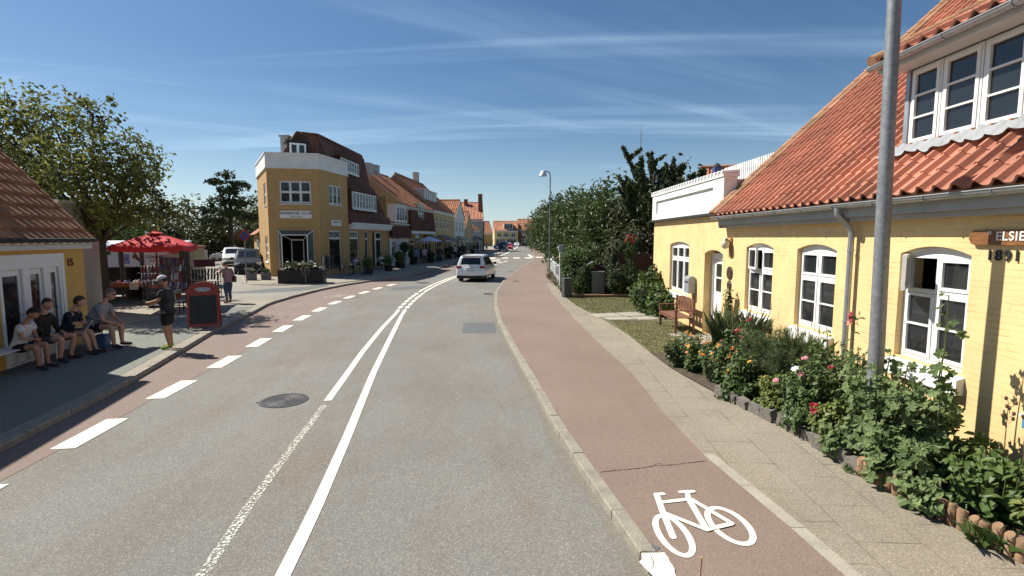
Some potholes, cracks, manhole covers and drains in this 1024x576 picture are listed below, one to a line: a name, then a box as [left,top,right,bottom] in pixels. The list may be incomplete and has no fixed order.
crack [602,461,701,472]
manhole cover [256,393,309,408]
